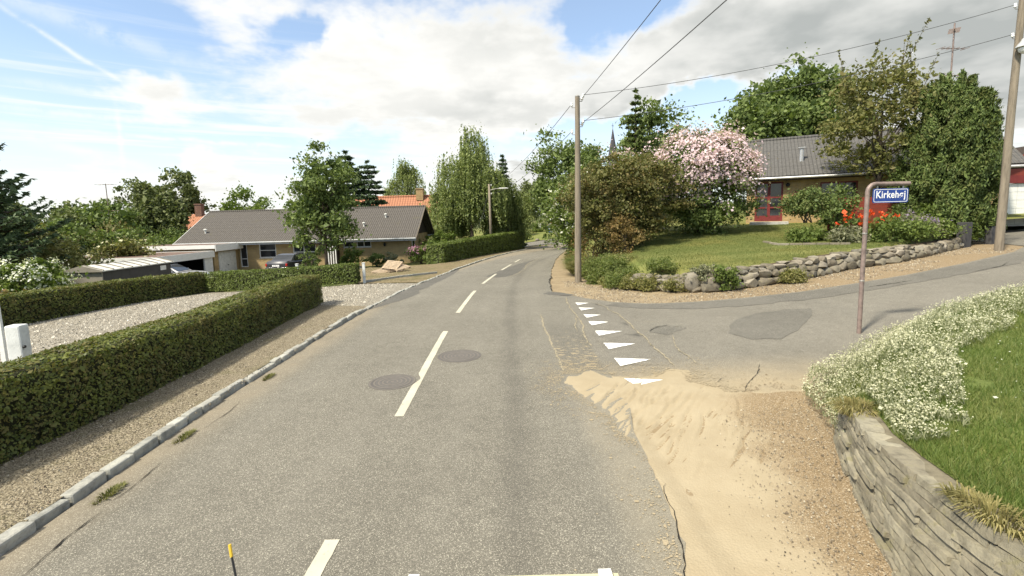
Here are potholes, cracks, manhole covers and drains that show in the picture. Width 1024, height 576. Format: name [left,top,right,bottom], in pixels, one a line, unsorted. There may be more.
manhole cover [368,374,416,390]
manhole cover [437,350,482,363]
